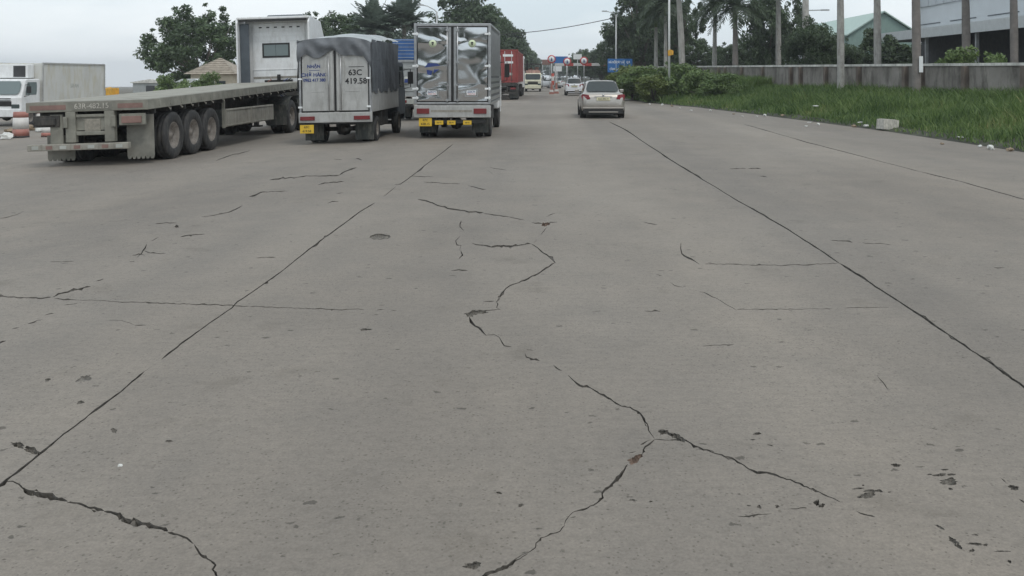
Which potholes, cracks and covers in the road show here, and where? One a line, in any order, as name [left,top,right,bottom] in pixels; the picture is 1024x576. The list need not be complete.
pothole [927,469,958,490]
pothole [853,485,891,499]
crack [411,167,875,576]
crack [130,222,203,262]
crack [205,158,361,217]
pothole [935,525,1011,563]
crack [7,481,217,576]
